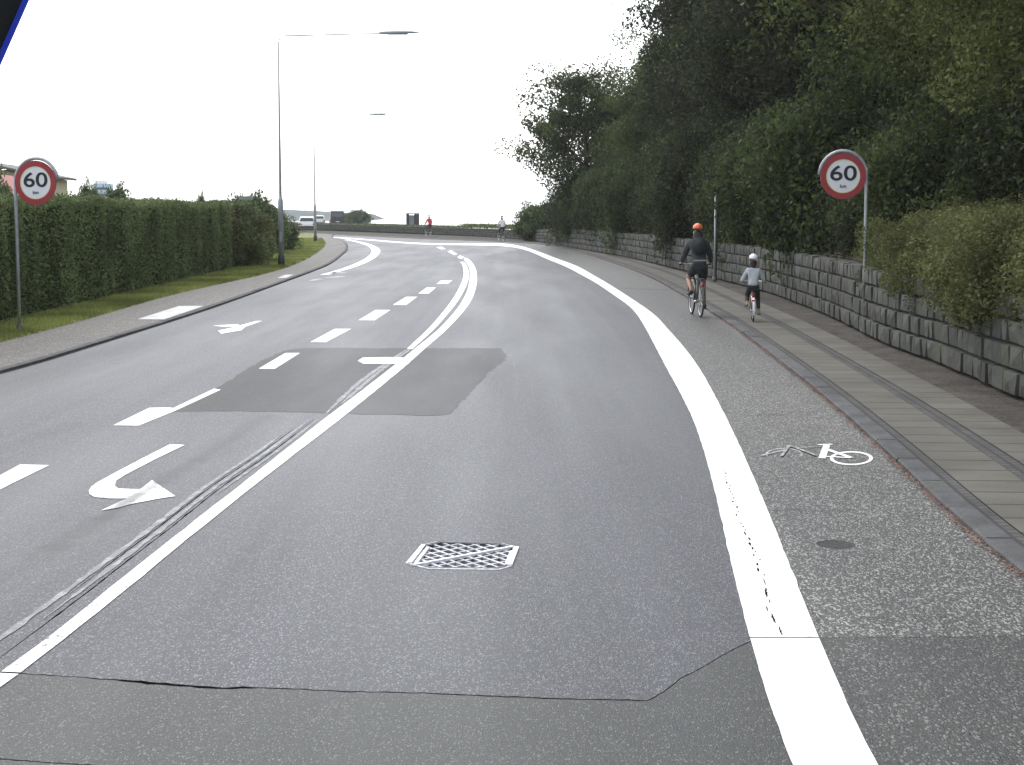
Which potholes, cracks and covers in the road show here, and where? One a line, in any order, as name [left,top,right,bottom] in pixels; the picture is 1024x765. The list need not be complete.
crack [724,470,782,635]
crack [0,641,750,701]
manhole cover [816,540,856,549]
